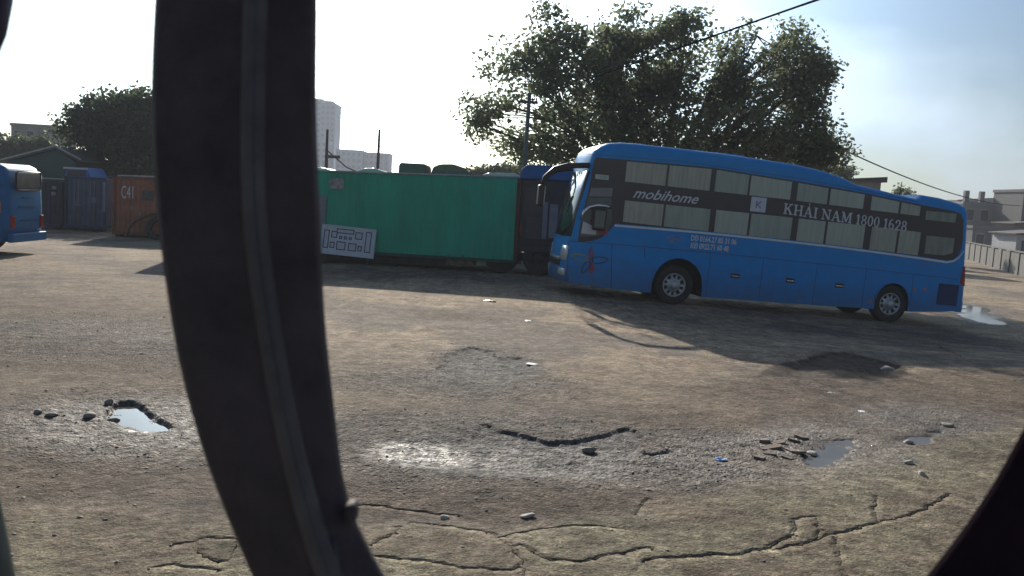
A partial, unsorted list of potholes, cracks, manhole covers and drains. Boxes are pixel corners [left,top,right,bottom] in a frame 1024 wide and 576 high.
pothole [97,400,177,437]
crack [359,494,953,576]
crack [150,537,240,573]
